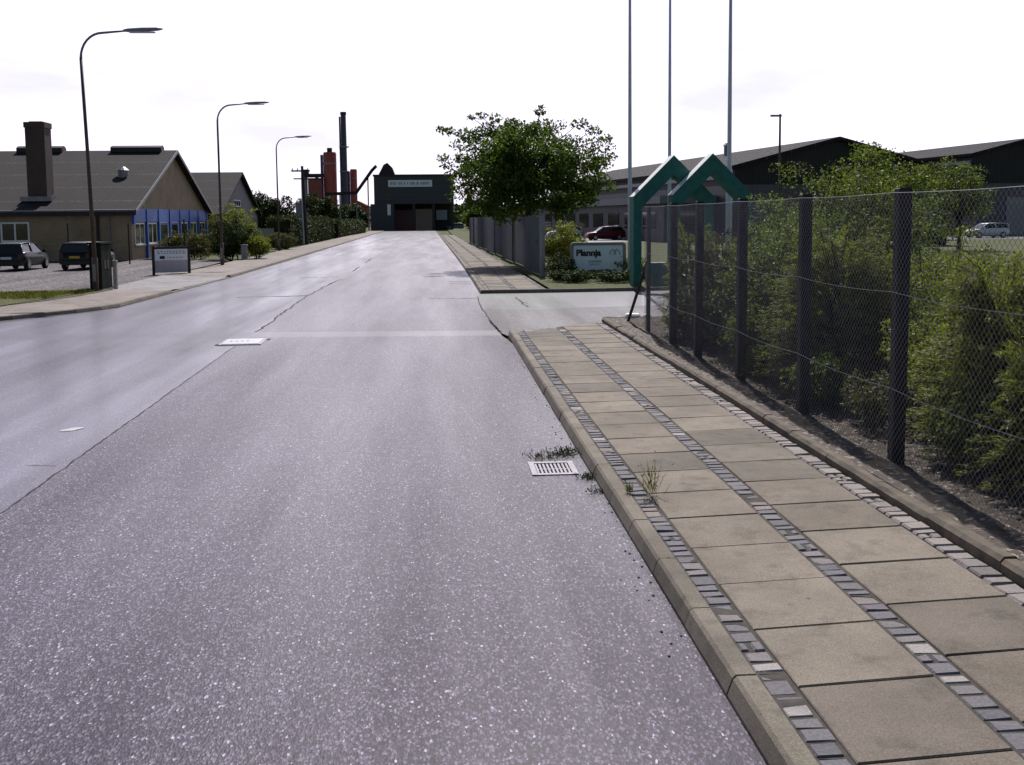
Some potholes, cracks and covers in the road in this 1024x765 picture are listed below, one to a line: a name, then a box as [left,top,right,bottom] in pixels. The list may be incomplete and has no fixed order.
manhole cover [214,338,270,346]
drain grate [528,461,579,476]
